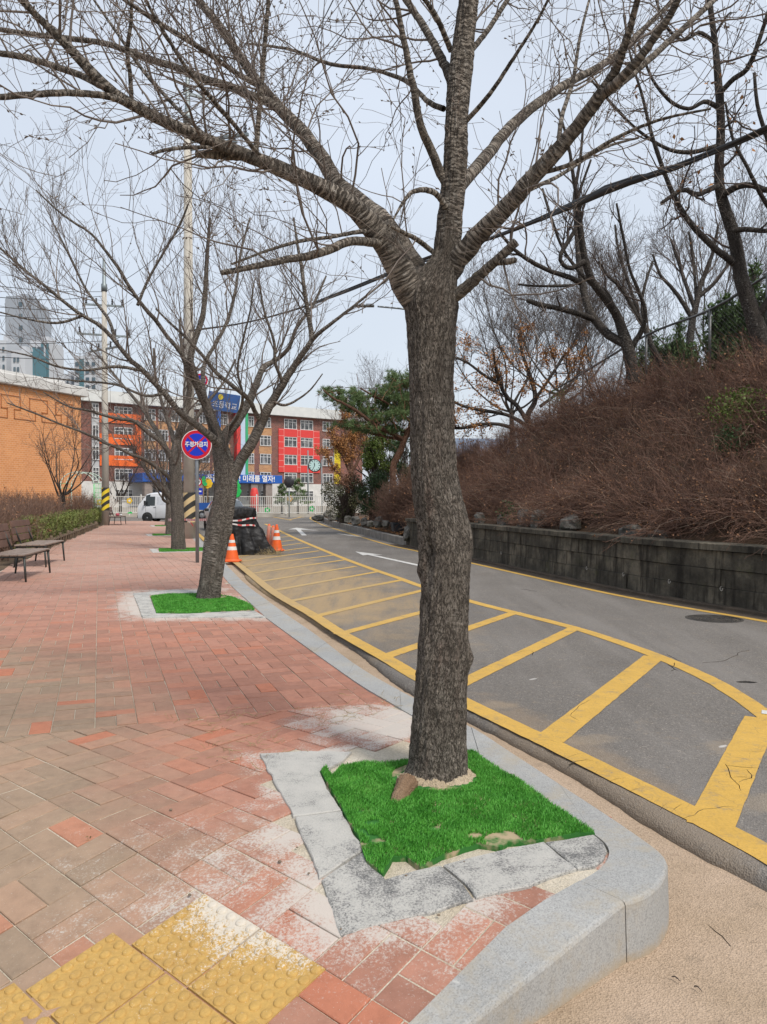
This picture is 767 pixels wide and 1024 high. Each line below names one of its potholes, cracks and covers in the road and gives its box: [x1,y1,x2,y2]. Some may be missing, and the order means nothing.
manhole cover [685,614,744,623]
